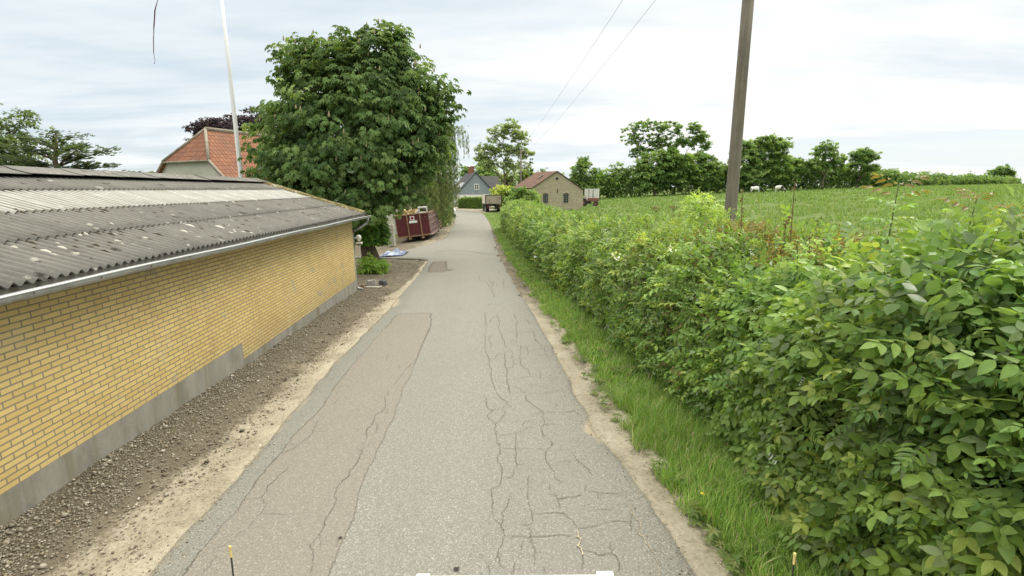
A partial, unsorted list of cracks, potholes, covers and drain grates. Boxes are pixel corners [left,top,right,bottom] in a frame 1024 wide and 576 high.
crack [310,393,388,571]
crack [479,273,660,576]
crack [184,422,317,573]
